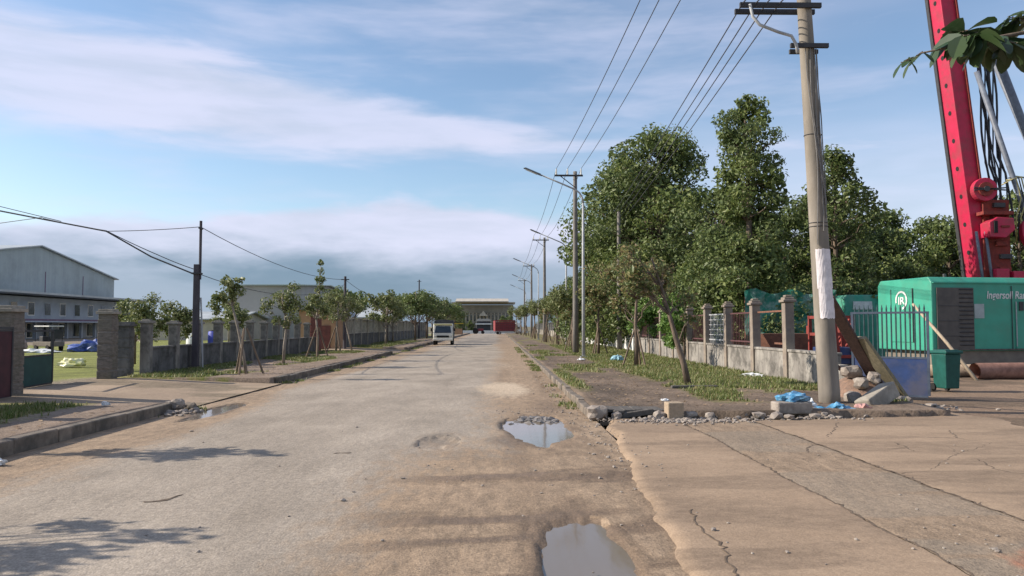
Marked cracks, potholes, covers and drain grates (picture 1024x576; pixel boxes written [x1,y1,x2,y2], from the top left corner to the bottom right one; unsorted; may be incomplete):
crack [765,422,1024,520]
pothole [166,401,255,425]
pothole [411,434,461,451]
pothole [524,504,656,576]
crack [687,425,974,576]
pothole [490,411,586,453]
